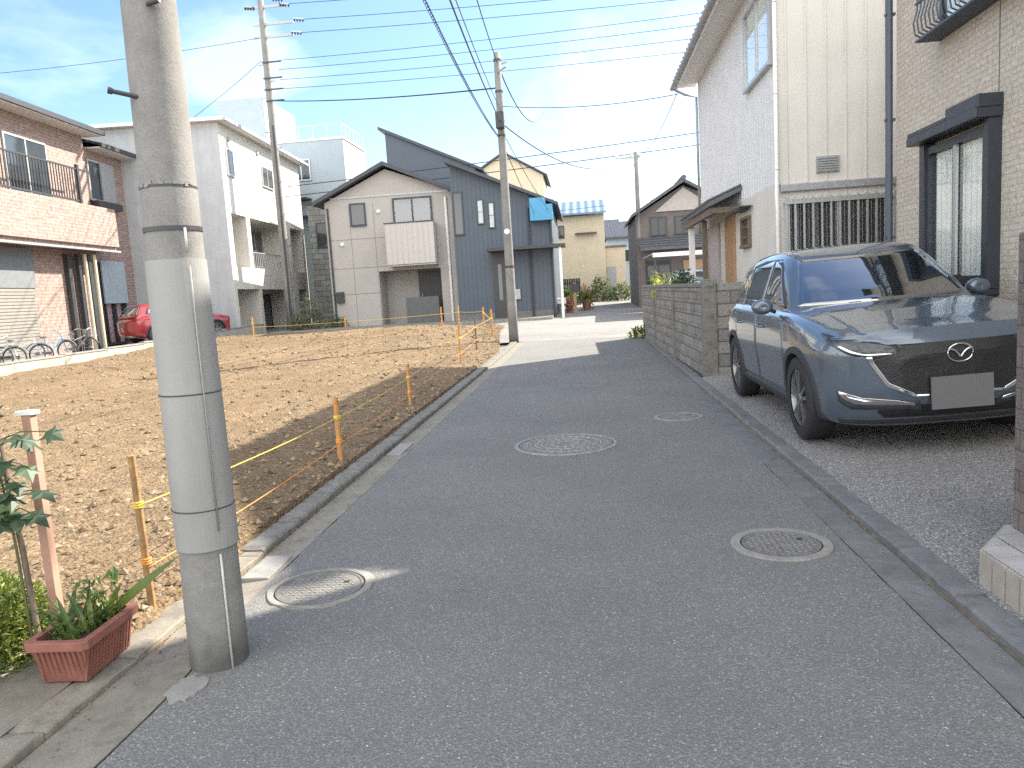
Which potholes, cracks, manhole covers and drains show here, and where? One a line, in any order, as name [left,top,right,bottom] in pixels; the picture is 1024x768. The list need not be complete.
manhole cover [730,528,834,562]
manhole cover [515,434,618,456]
manhole cover [654,412,703,421]
manhole cover [267,567,374,610]
